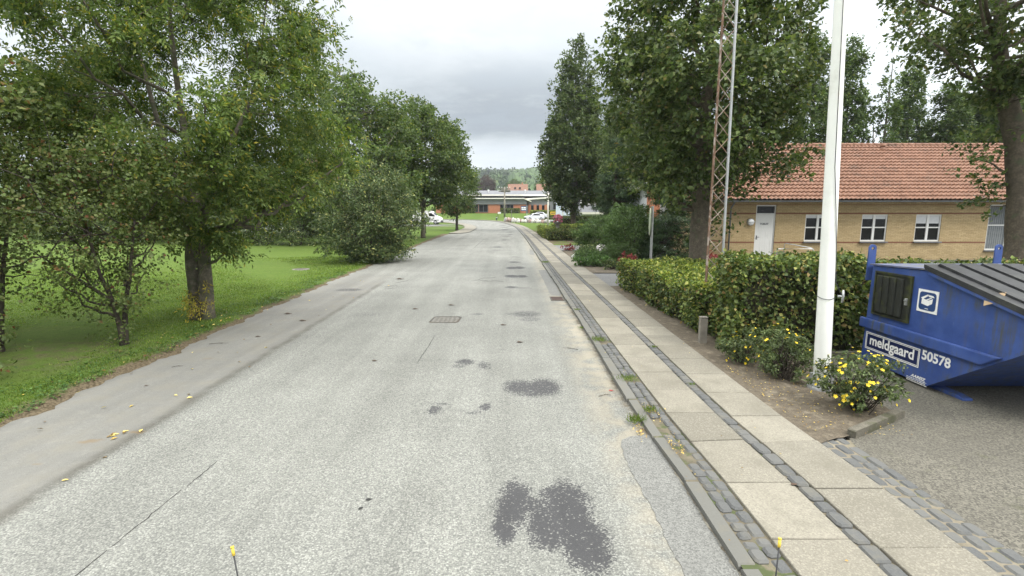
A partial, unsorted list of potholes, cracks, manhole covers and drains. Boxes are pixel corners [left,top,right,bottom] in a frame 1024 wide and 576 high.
crack [75,461,217,576]
